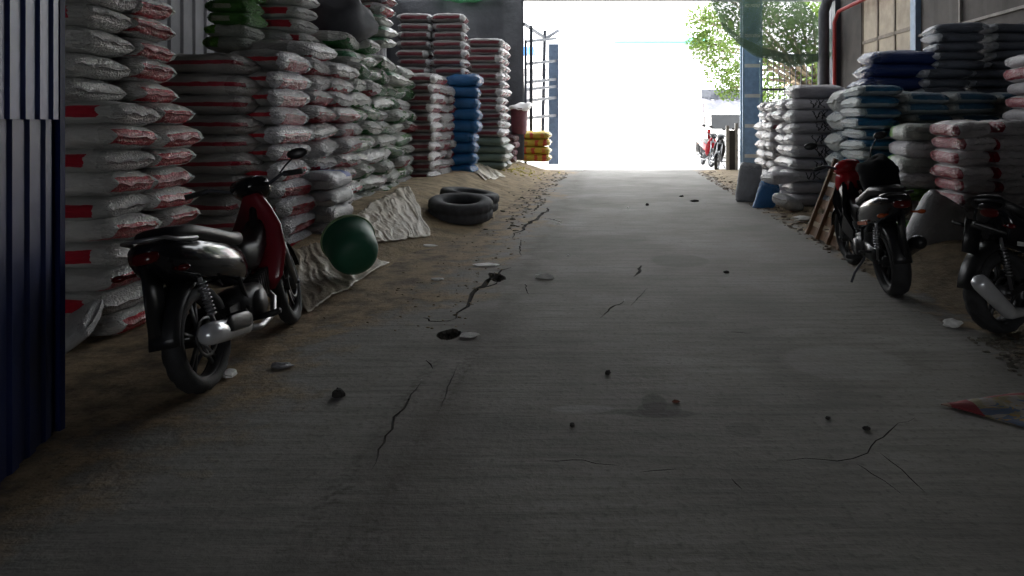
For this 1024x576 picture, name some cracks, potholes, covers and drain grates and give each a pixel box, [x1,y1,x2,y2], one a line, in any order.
crack [793,418,917,493]
crack [603,265,644,316]
crack [426,205,560,322]
crack [372,361,457,469]
